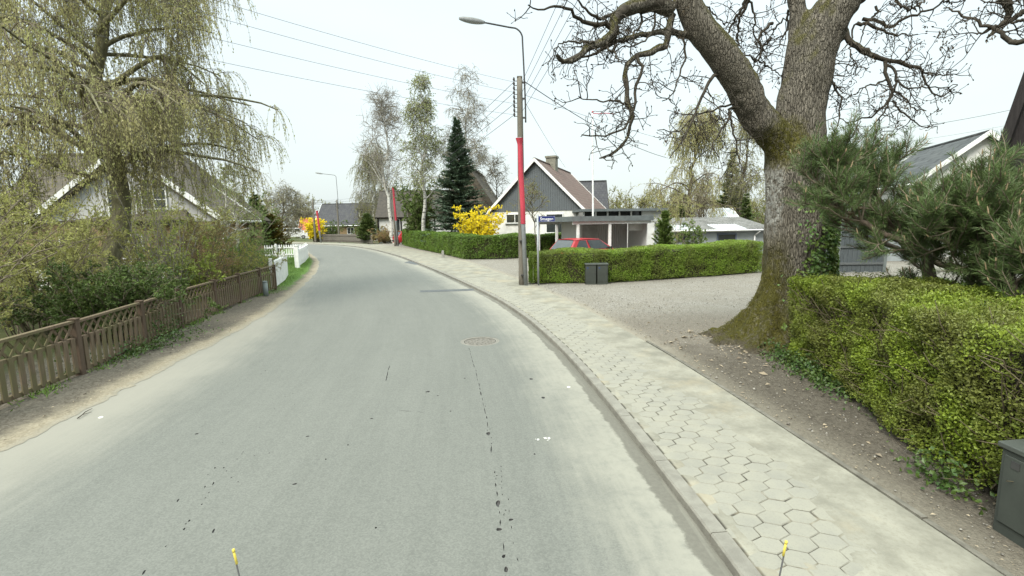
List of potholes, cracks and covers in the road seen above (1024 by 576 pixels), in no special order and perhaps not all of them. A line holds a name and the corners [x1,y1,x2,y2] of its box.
manhole cover [460,337,500,346]
